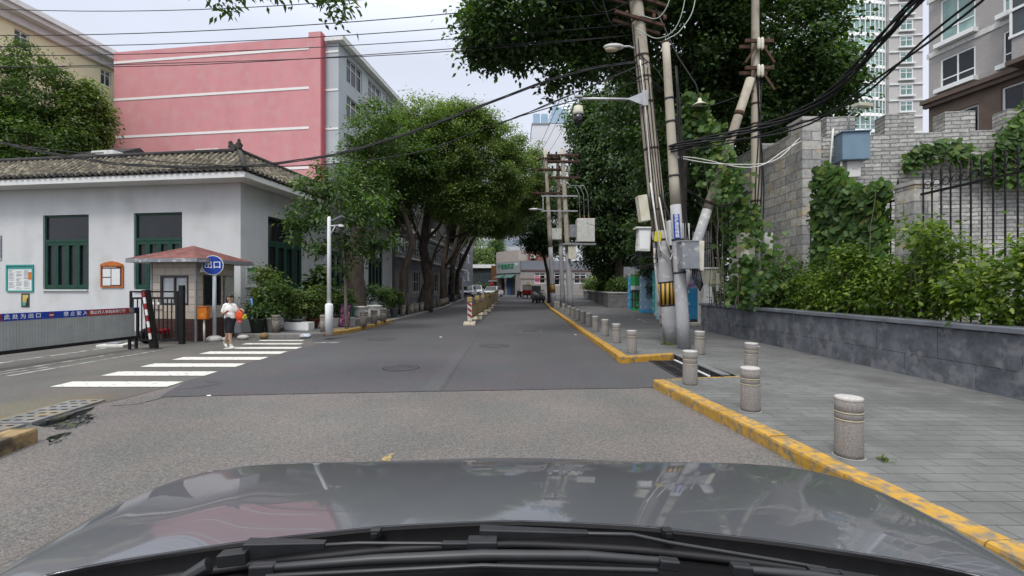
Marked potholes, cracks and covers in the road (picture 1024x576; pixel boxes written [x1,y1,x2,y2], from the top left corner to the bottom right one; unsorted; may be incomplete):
drain grate [650,354,730,377]
pothole [45,432,74,445]
pothole [27,406,99,431]
